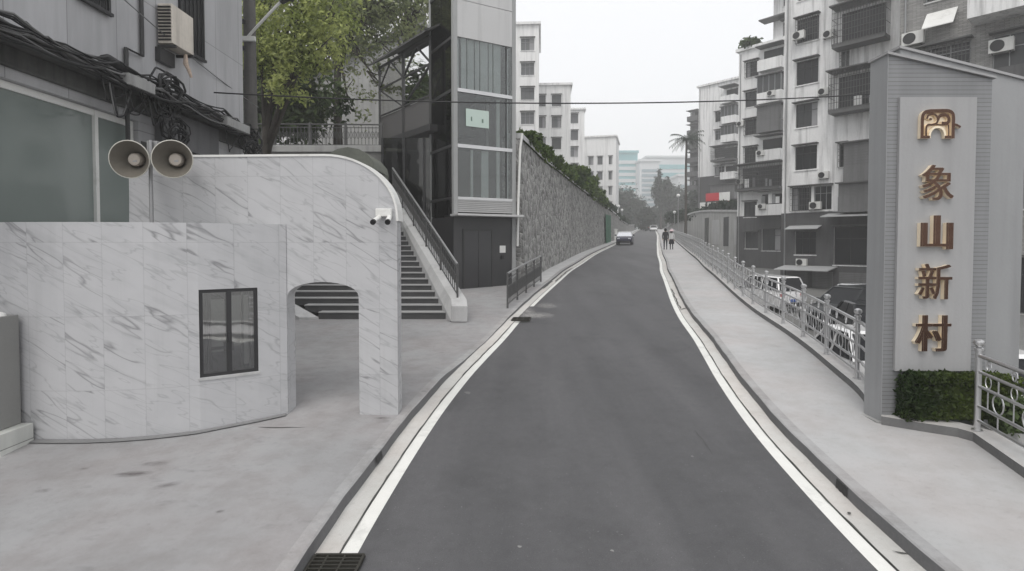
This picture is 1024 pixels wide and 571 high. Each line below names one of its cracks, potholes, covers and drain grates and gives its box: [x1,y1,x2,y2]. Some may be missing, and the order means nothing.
drain grate [303,553,365,571]
